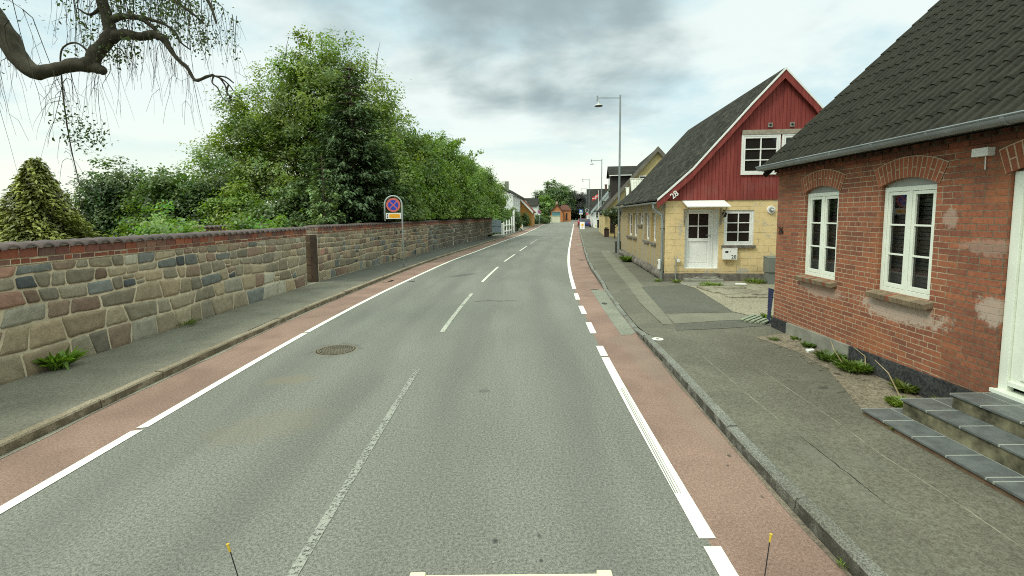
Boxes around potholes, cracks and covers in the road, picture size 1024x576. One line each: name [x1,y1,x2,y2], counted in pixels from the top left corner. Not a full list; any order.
drain grate [740,314,771,325]
manhole cover [314,344,358,356]
